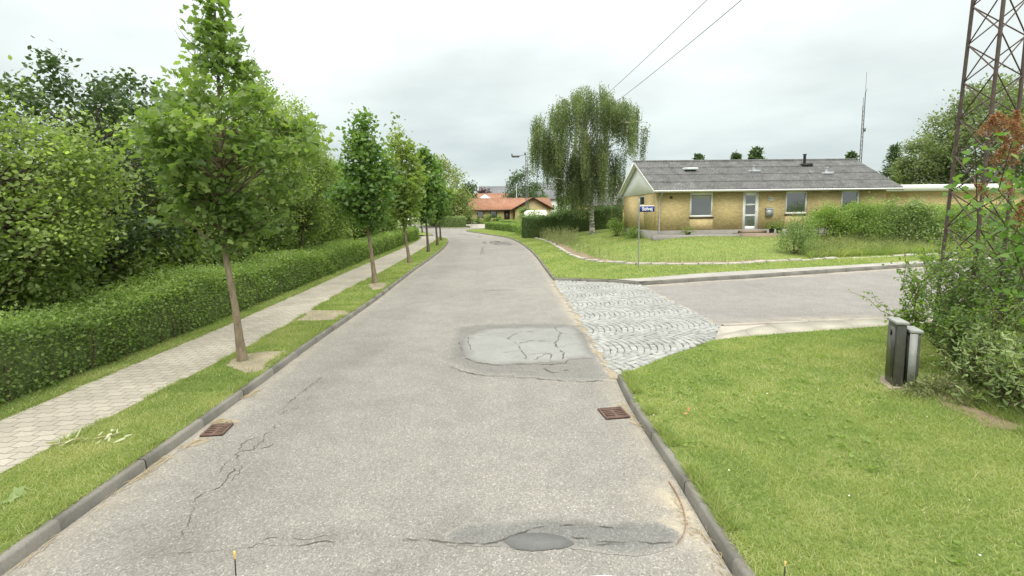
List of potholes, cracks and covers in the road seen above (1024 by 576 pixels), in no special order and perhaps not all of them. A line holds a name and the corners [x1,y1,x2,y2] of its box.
crack [181,377,321,537]
drain grate [200,423,234,437]
crack [400,524,672,545]
crack [451,325,597,382]
crack [179,535,332,553]
drain grate [597,406,630,420]
